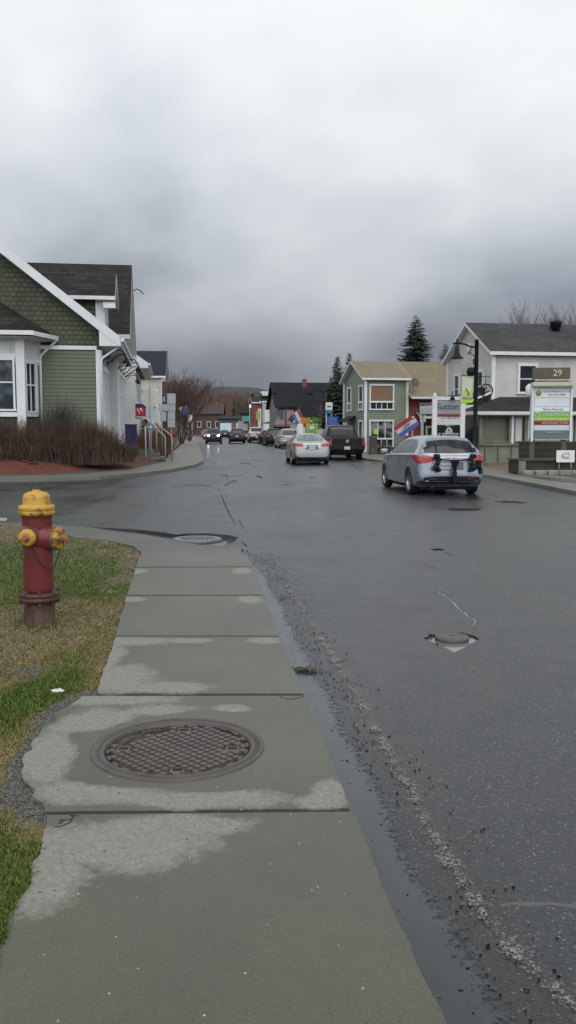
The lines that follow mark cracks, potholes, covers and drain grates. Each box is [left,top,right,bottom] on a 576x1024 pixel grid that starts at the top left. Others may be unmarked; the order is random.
manhole cover [435,632,469,644]
crack [431,586,477,629]
drain grate [172,535,222,545]
manhole cover [90,718,264,782]
